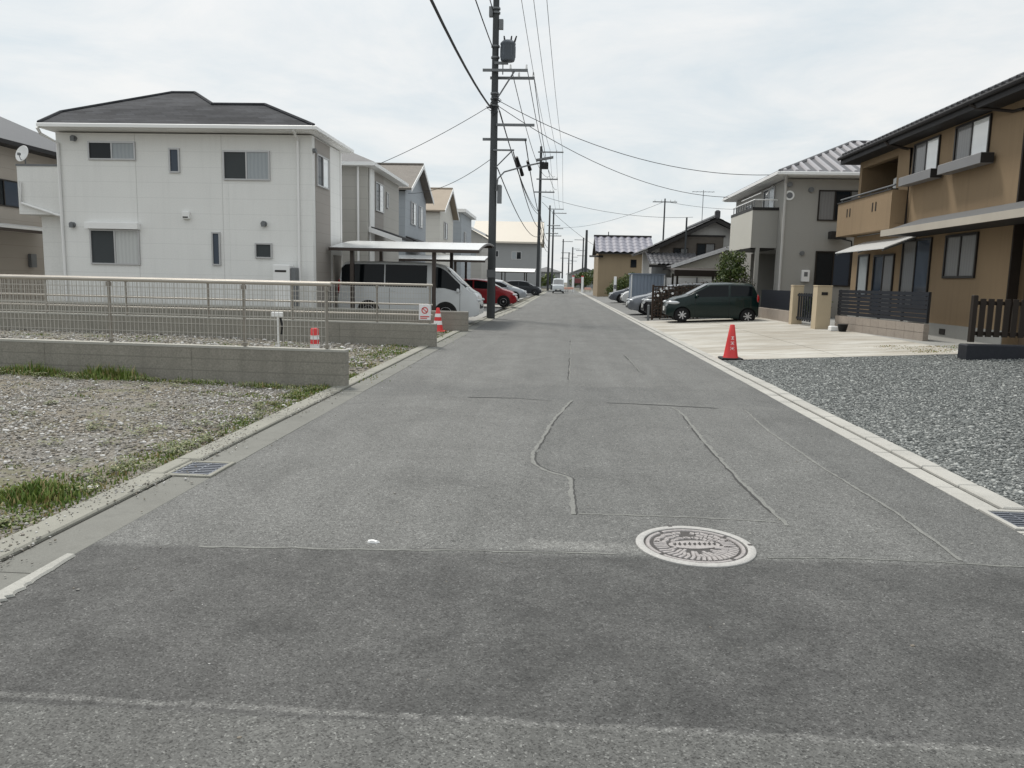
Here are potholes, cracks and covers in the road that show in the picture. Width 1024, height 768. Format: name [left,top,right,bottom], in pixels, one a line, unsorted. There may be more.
crack [480,397,578,514]
crack [605,402,790,526]
manhole cover [636,525,757,568]
drain grate [165,460,236,478]
drain grate [978,508,1024,531]
